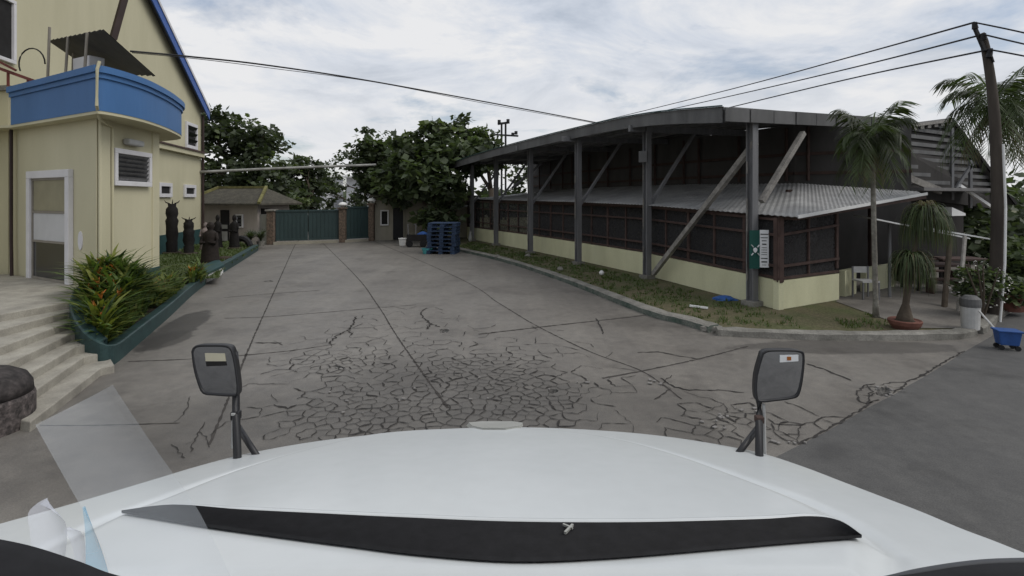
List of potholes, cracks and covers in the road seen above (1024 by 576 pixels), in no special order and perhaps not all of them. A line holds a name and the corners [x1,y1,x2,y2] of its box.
crack [171,398,210,458]
crack [210,307,965,444]
